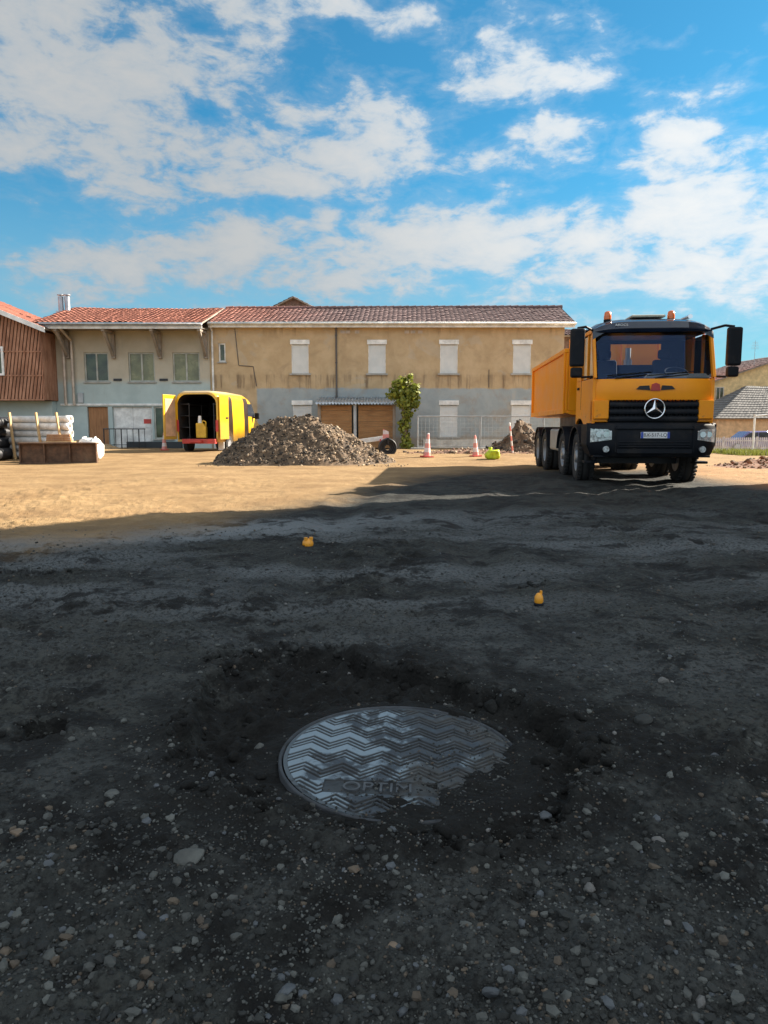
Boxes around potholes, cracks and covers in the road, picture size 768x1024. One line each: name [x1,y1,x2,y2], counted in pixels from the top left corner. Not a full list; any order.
pothole [161,641,614,863]
manhole cover [278,706,512,825]
